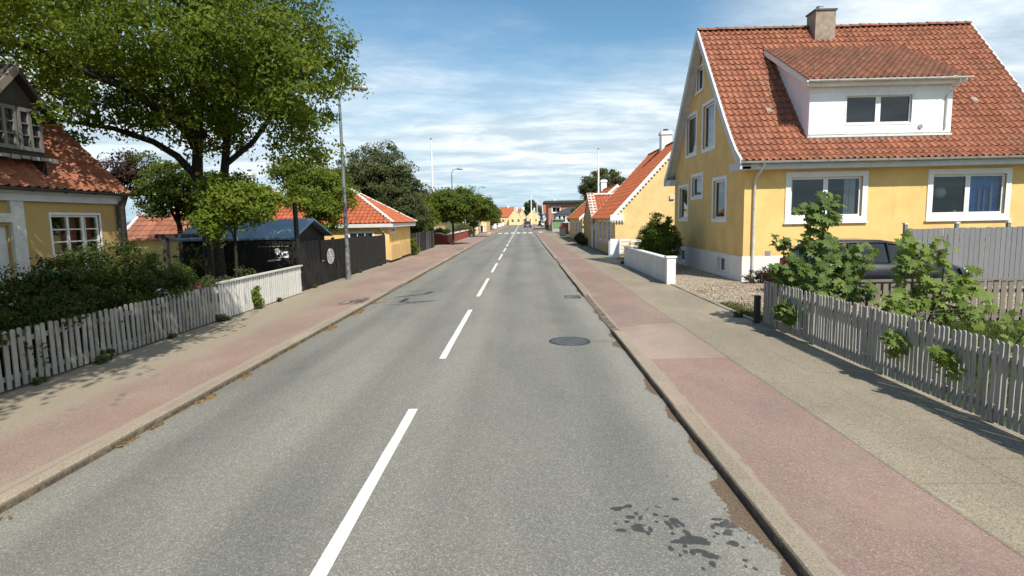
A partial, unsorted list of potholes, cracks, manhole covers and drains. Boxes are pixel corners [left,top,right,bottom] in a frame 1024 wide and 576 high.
manhole cover [549,337,590,346]
